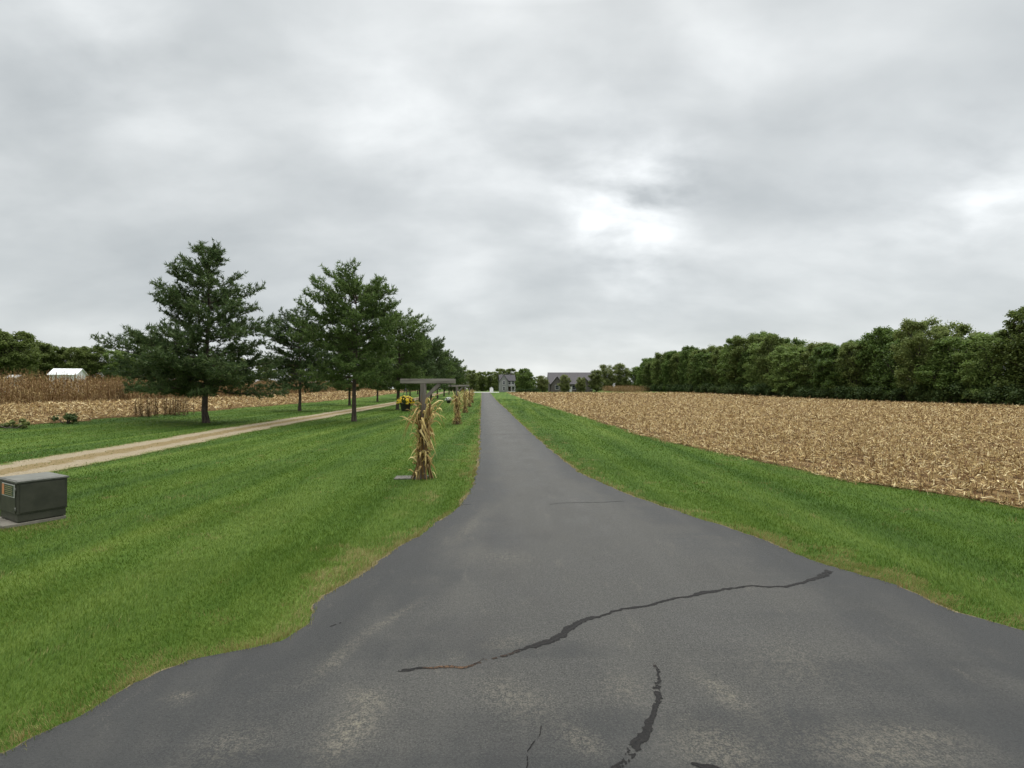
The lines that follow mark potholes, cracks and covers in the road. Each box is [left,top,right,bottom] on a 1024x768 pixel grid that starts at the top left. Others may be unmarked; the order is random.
crack [398,570,834,672]
crack [611,663,663,768]
